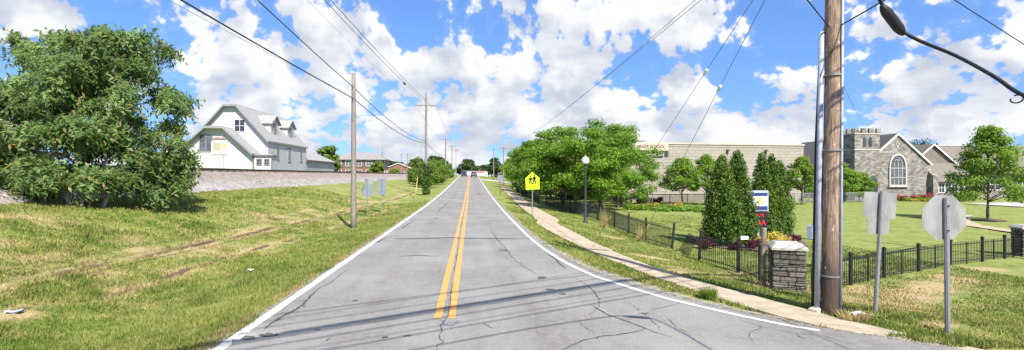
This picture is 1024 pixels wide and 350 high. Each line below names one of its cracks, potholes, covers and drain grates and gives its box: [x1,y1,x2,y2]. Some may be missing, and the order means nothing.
crack [265,269,348,341]
crack [437,283,454,346]
crack [563,281,691,350]
